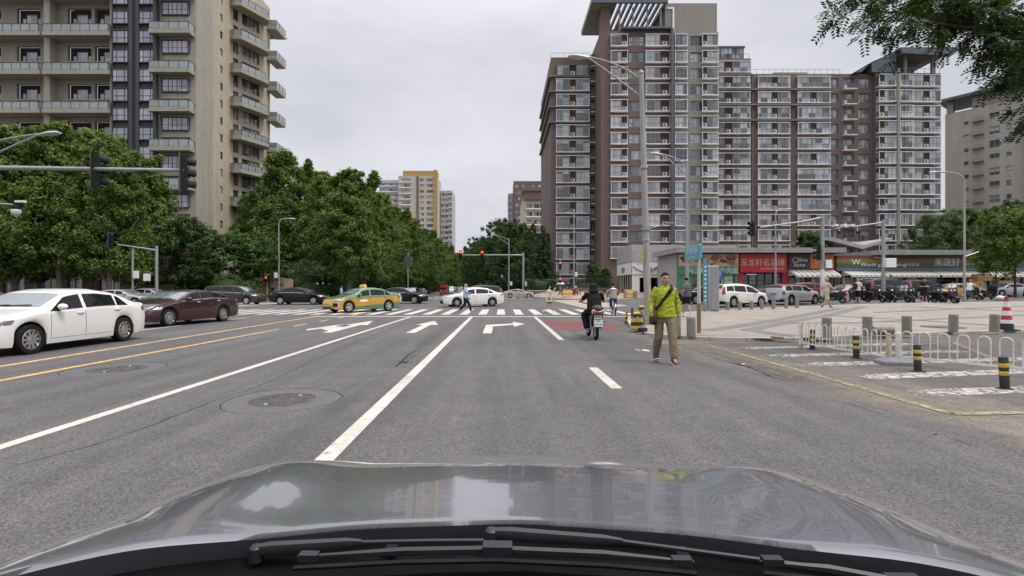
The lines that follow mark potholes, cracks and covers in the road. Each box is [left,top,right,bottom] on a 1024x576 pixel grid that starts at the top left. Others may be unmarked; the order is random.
crack [678,344,791,382]
manhole cover [58,362,168,376]
manhole cover [219,388,342,414]
